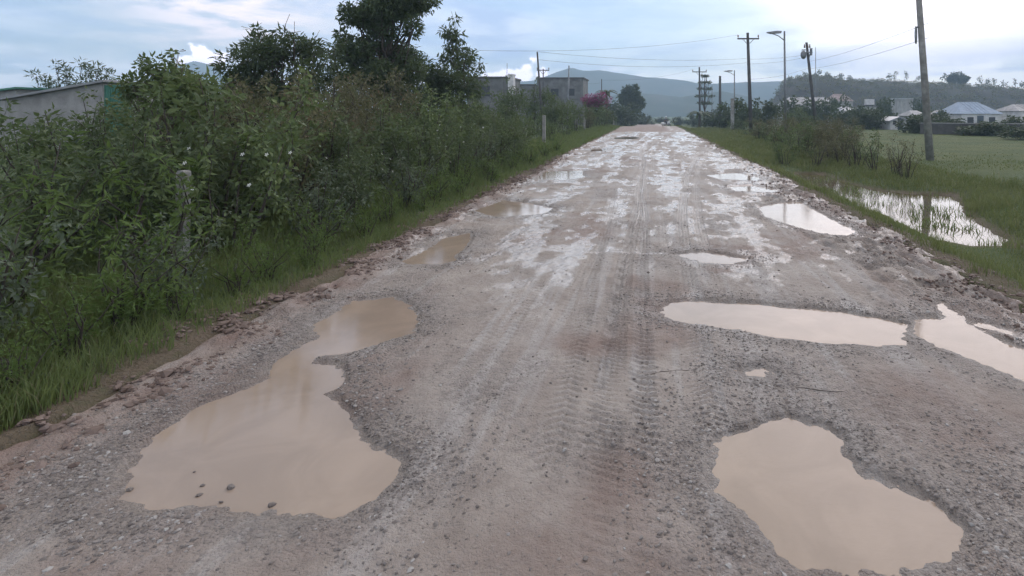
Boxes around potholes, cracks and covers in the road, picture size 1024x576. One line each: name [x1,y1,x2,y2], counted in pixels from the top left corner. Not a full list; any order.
pothole [534,169,588,180]
pothole [294,291,430,357]
pothole [653,294,921,347]
pothole [664,248,757,264]
pothole [904,296,1024,384]
pothole [78,341,421,527]
pothole [703,171,764,181]
pothole [691,408,996,576]
pothole [393,230,479,266]
pothole [755,200,863,236]
pothole [469,198,558,218]
